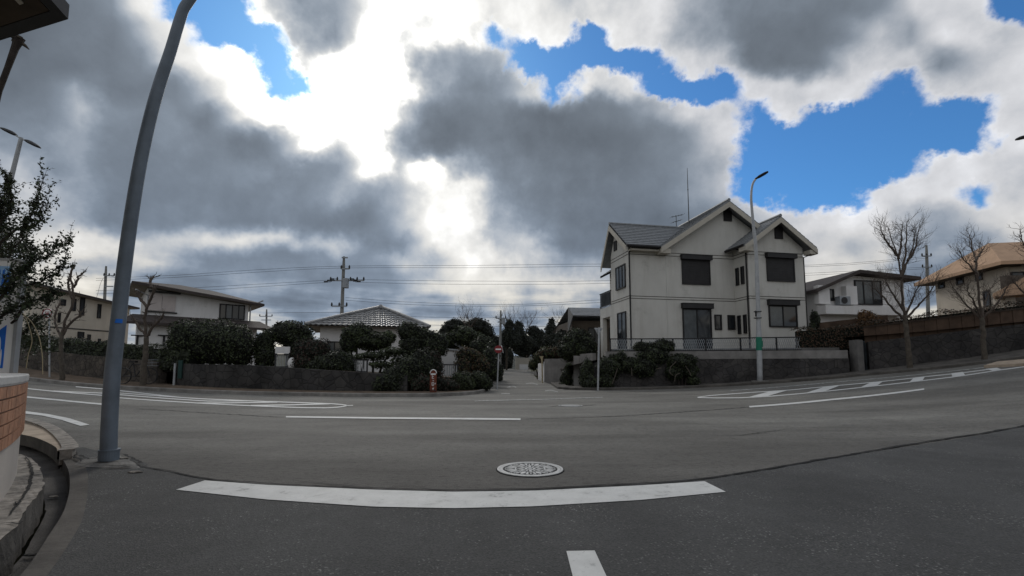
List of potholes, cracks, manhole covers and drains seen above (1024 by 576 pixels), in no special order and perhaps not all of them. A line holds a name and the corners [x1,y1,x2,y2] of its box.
manhole cover [496,462,564,478]
